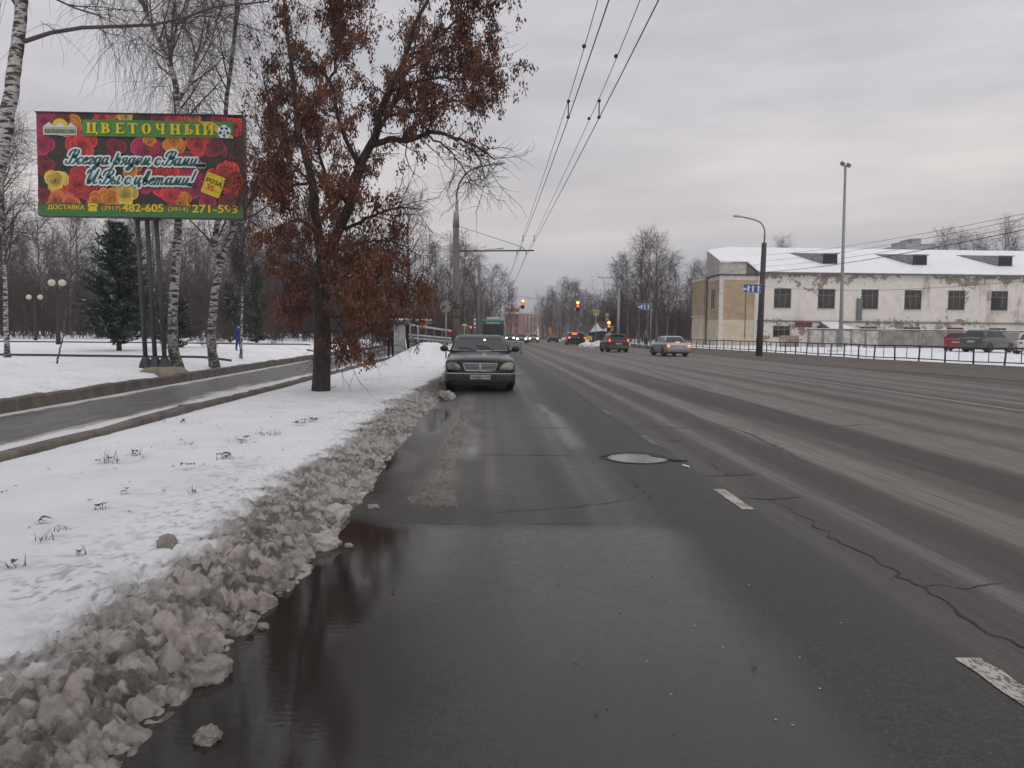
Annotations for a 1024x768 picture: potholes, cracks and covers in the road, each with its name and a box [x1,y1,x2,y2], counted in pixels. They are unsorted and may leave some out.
crack [738,497,1024,647]
crack [493,478,720,513]
manhole cover [603,453,670,464]
